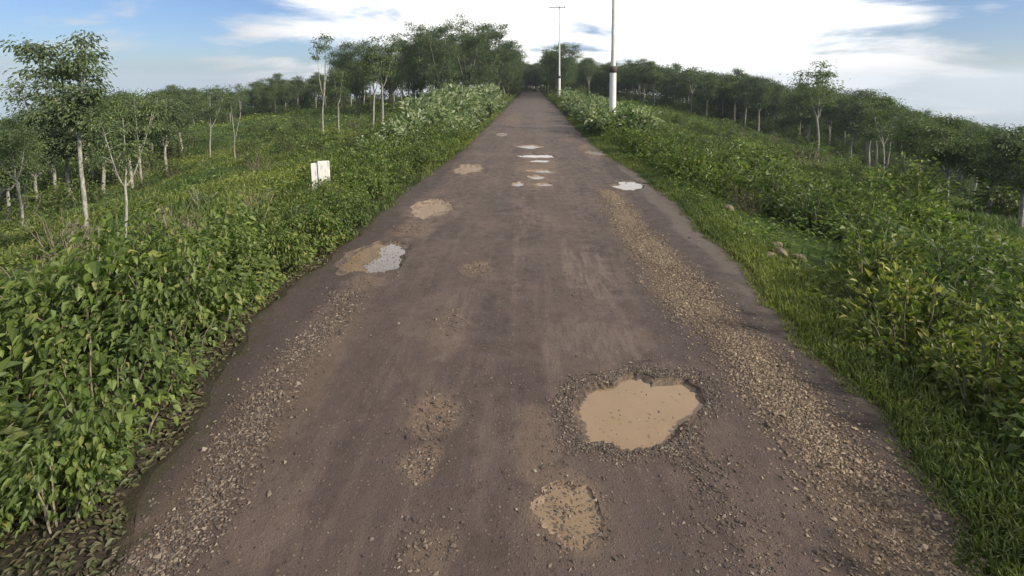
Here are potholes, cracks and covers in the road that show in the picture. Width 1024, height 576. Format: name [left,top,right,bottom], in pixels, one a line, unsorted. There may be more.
pothole [529,480,605,551]
pothole [335,241,412,275]
pothole [454,164,485,175]
pothole [410,199,455,220]
pothole [610,179,646,191]
pothole [572,372,706,453]
